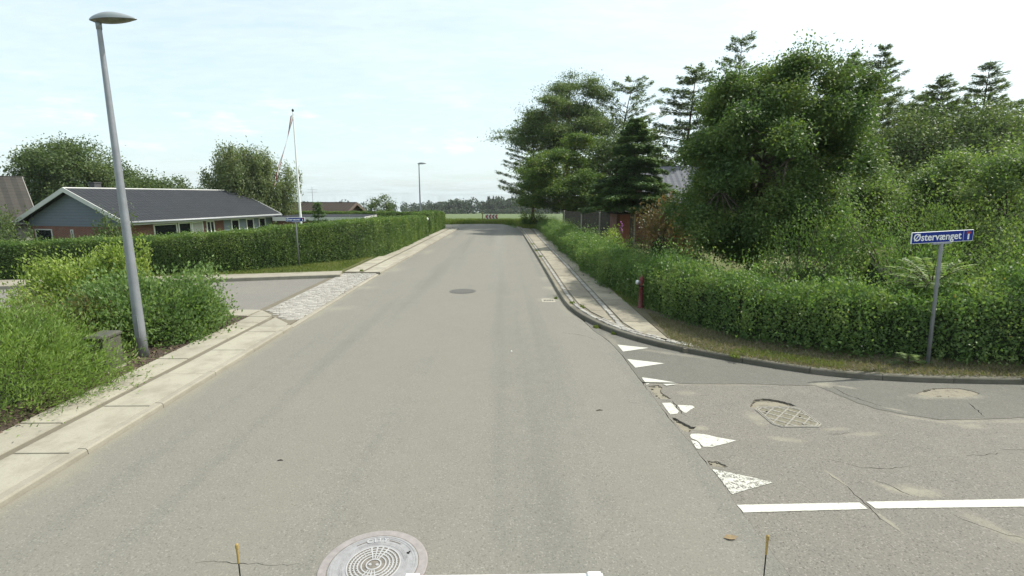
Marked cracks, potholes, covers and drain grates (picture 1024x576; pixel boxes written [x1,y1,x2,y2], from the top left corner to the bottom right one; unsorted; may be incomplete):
crack [830,465,912,530]
pothole [649,385,671,399]
manhole cover [317,531,428,576]
